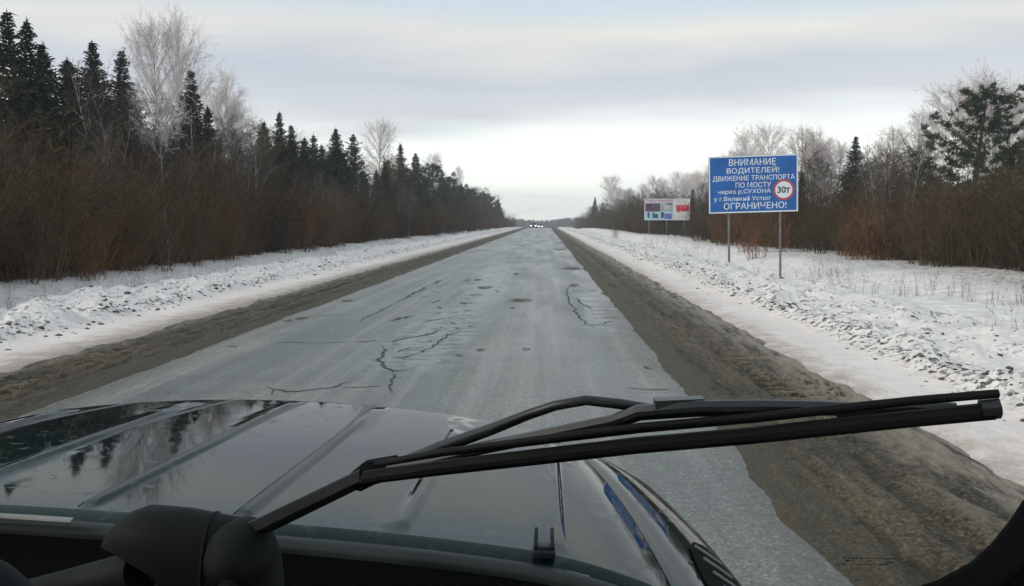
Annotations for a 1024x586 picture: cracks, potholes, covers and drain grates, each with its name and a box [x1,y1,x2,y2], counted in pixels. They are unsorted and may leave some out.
crack [267,273,472,394]
crack [565,286,619,329]
